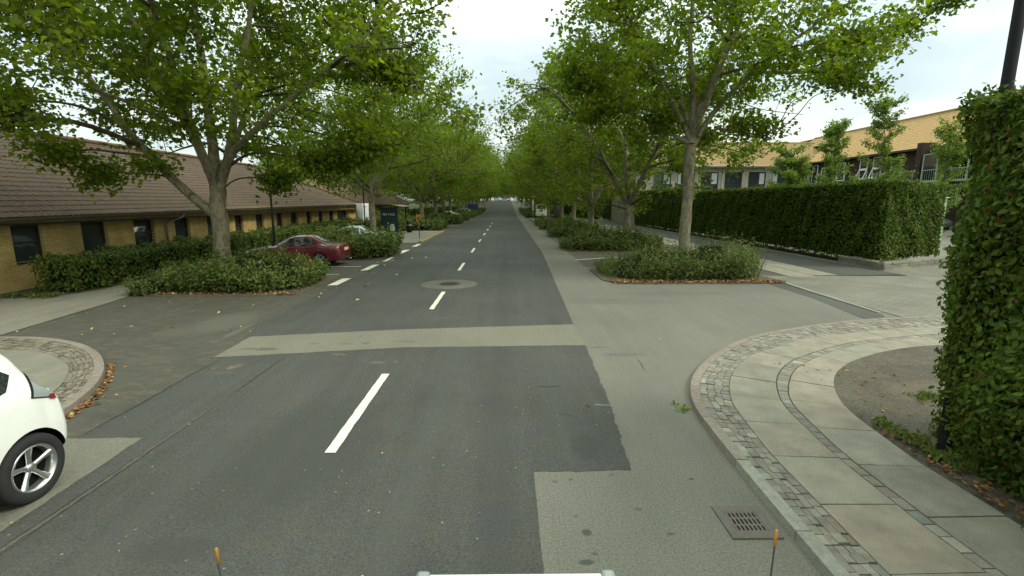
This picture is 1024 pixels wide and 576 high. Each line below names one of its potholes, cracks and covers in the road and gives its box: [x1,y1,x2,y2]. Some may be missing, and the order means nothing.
manhole cover [421,280,477,289]
drain grate [711,506,784,540]
